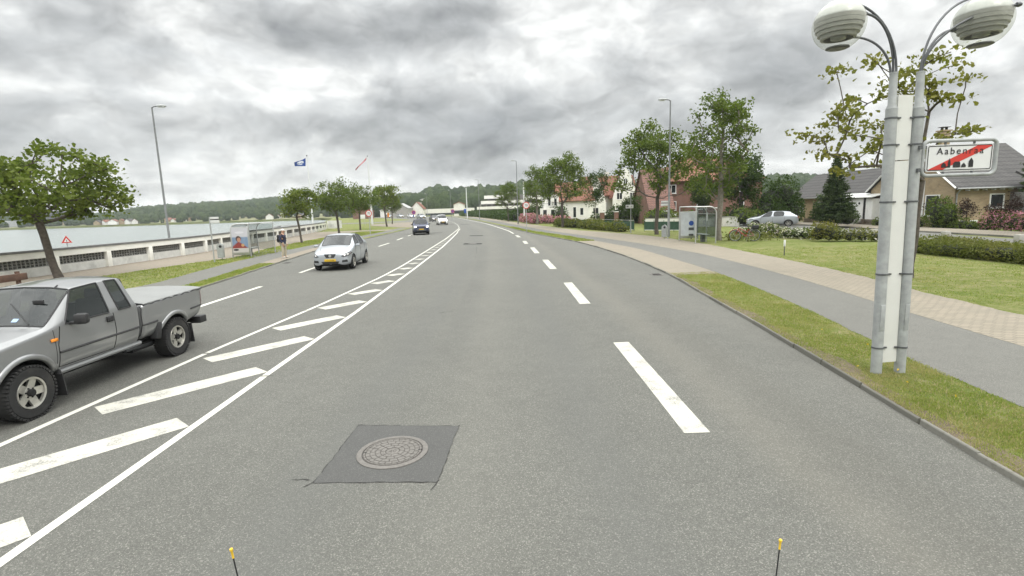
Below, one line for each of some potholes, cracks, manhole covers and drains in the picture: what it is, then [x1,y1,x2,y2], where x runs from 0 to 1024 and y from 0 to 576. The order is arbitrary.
manhole cover [356,436,428,469]
